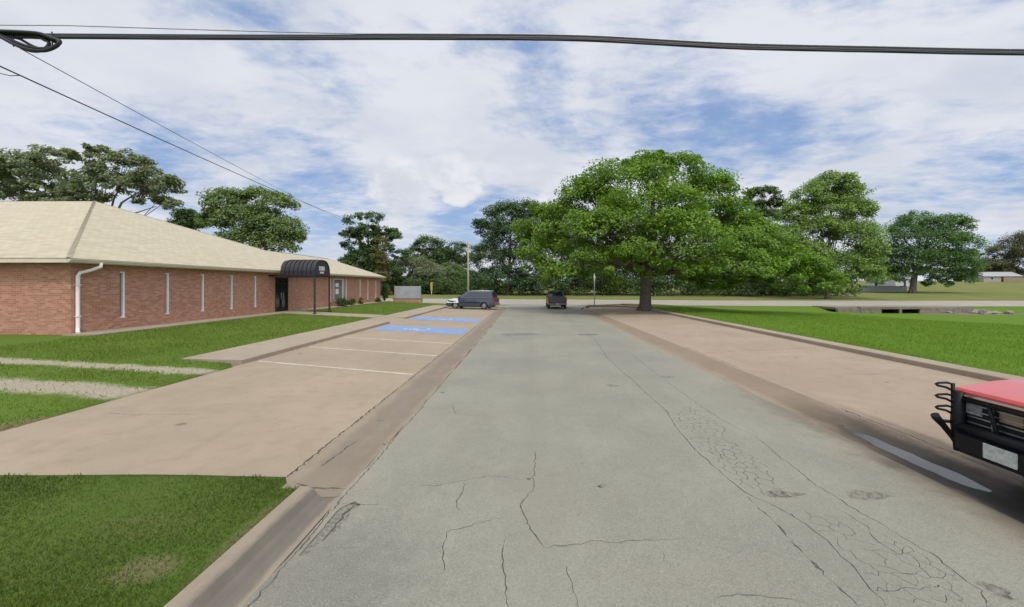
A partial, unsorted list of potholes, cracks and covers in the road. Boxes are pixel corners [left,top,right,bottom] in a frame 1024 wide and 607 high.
pothole [976,581,1014,601]
crack [594,339,987,607]
crack [416,454,678,607]
crack [247,337,483,607]
pothole [846,490,896,500]
pothole [765,490,805,498]
